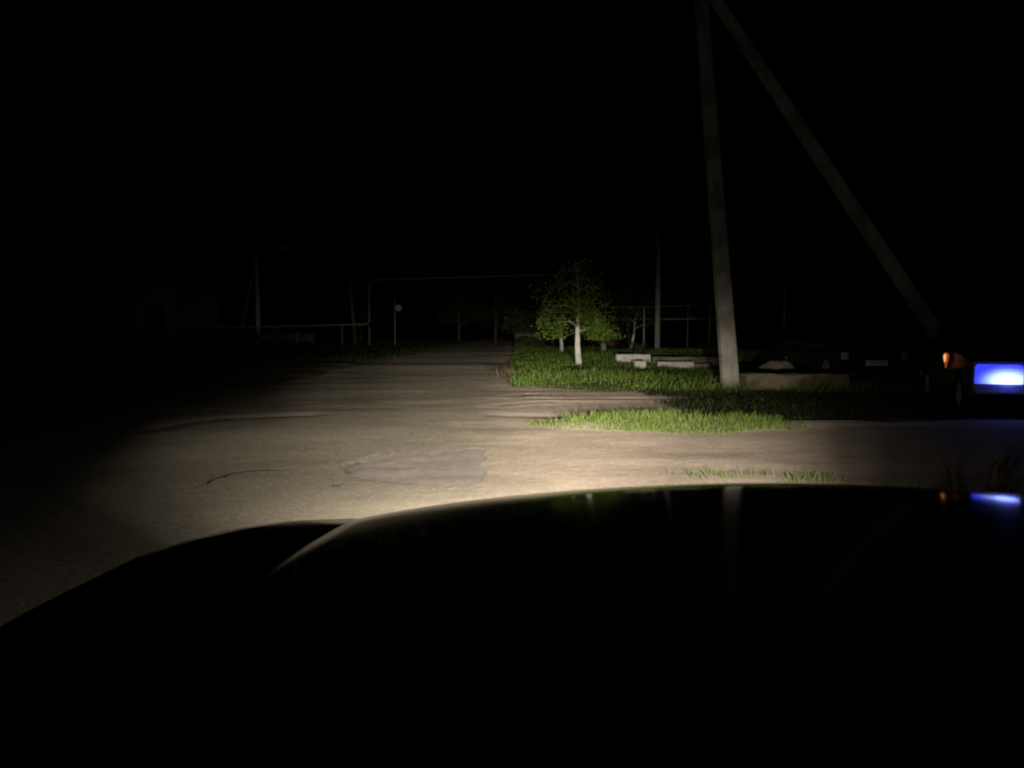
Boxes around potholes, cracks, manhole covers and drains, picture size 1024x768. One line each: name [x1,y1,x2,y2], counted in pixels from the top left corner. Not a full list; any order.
crack [195,470,299,488]
